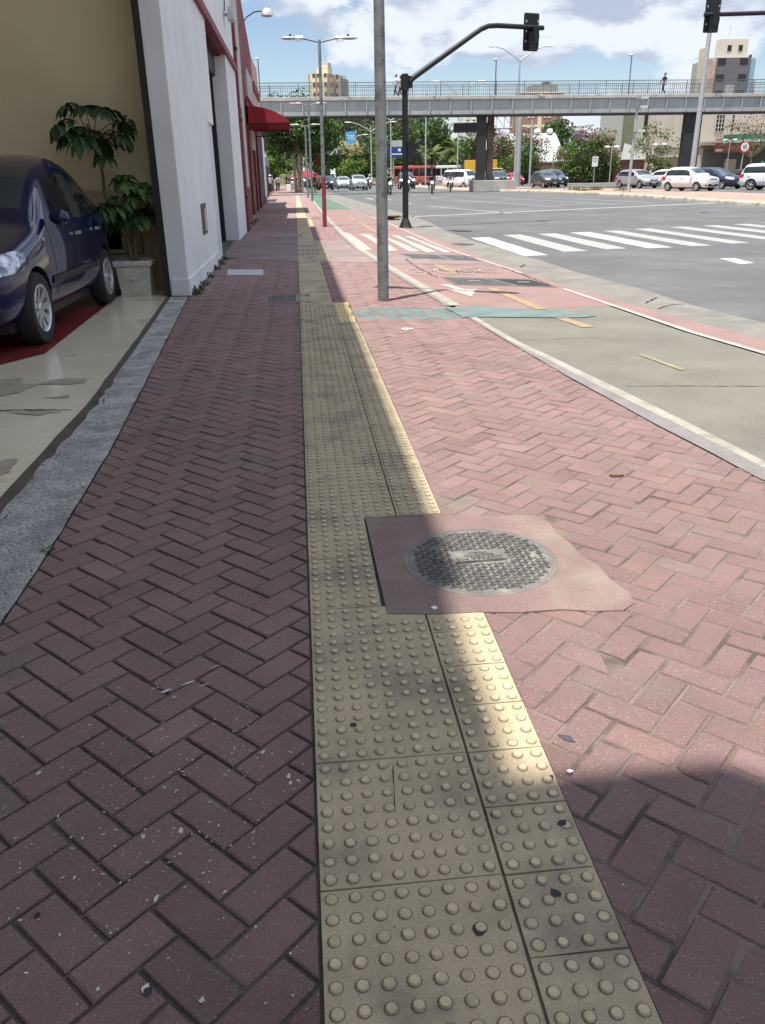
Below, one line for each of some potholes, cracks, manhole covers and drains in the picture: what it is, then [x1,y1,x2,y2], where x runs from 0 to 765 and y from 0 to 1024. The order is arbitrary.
manhole cover [404,528,558,596]
